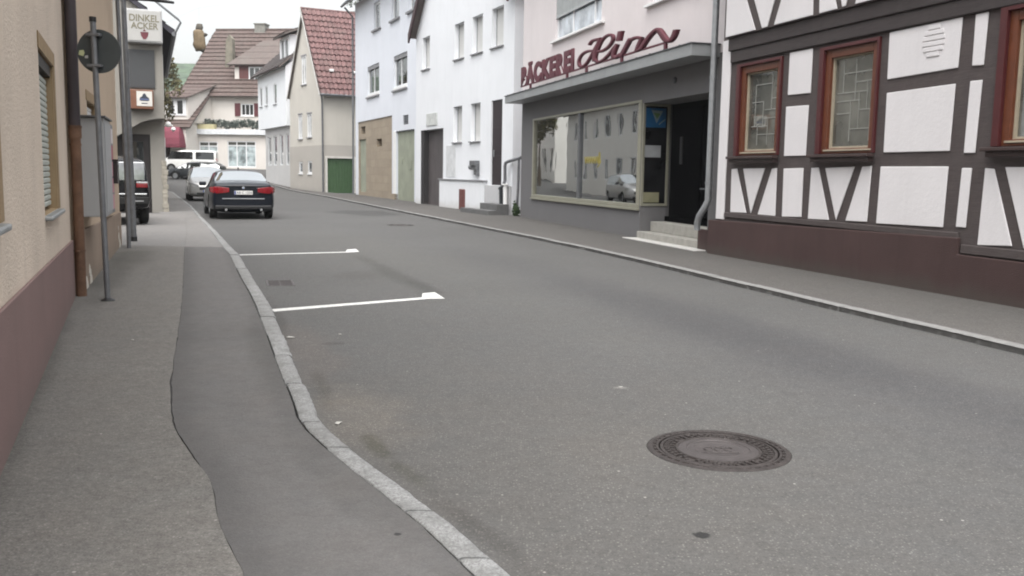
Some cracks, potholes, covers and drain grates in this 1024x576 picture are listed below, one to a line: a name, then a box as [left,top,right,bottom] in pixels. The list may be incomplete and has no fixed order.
manhole cover [647,430,792,472]
